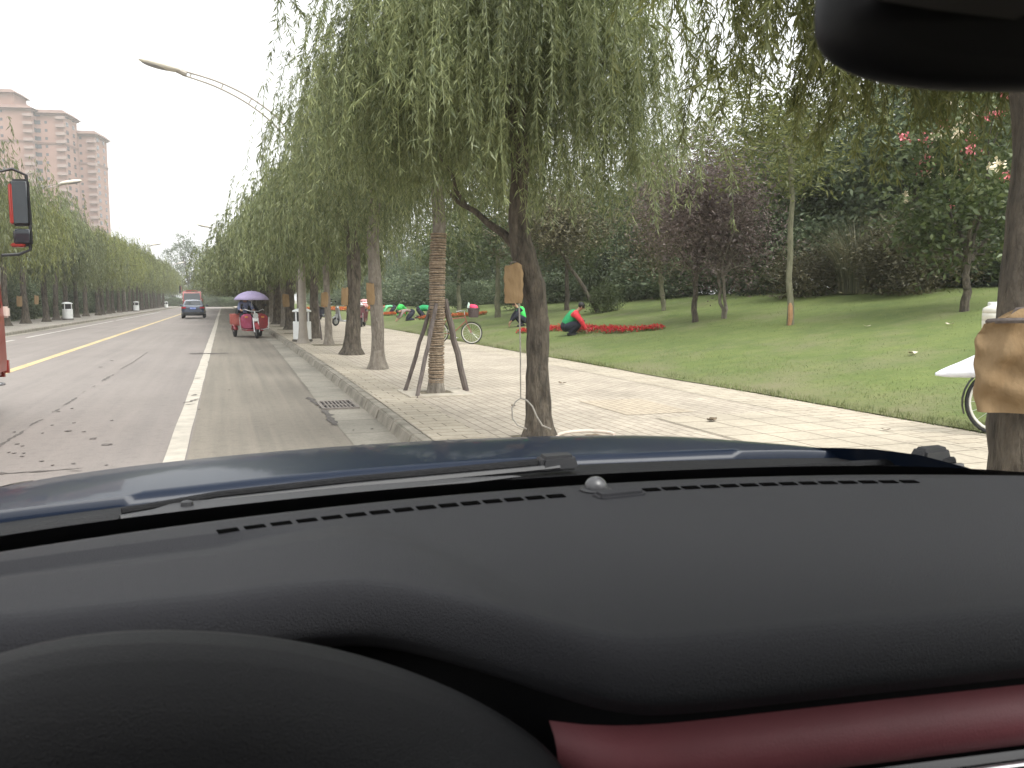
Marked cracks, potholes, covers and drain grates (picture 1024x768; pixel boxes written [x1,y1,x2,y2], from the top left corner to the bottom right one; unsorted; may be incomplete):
drain grate [316,400,360,410]
